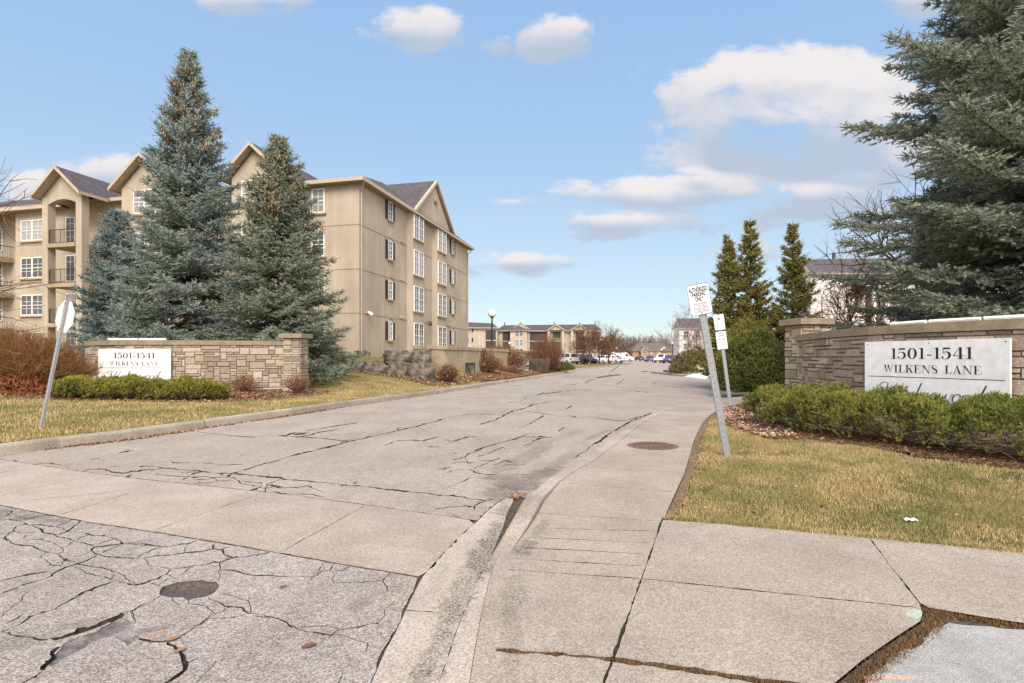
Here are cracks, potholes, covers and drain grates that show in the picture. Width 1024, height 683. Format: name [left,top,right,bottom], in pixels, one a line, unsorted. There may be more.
manhole cover [627,442,679,450]
crack [82,362,692,518]
crack [0,509,395,683]
pothole [48,617,140,666]
